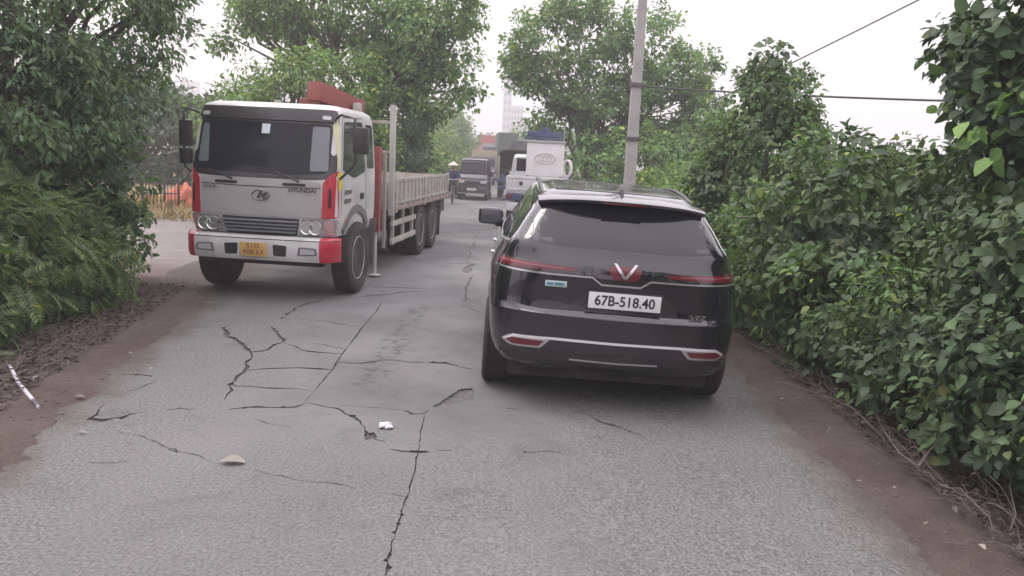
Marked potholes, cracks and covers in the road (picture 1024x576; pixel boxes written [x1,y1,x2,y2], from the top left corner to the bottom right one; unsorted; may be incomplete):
crack [576,412,642,436]
crack [86,405,212,462]
crack [222,287,470,442]
pothole [433,388,474,407]
